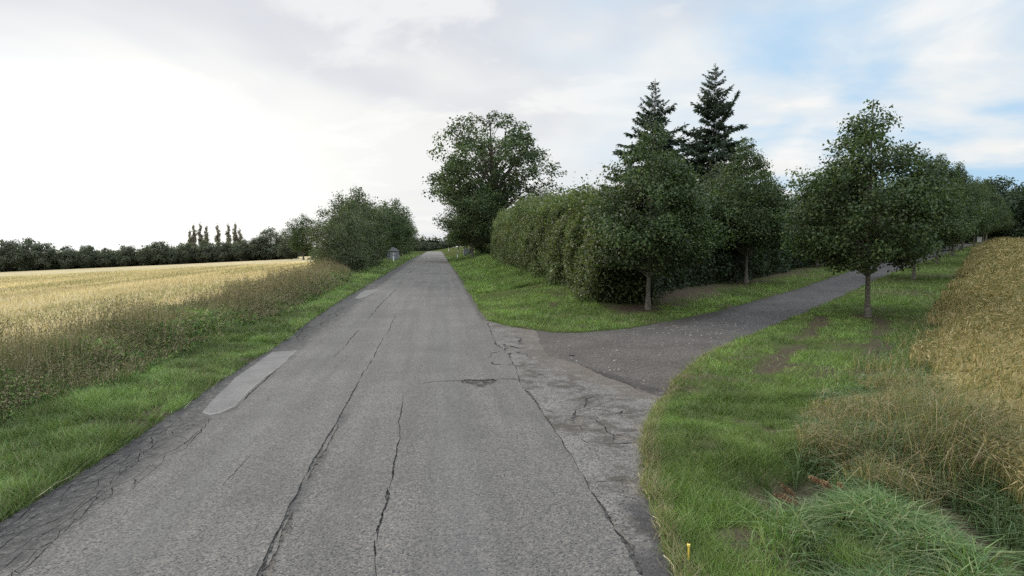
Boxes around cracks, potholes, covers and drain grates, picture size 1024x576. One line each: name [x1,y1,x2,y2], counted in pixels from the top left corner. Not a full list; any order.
crack [490,336,635,446]
crack [222,293,395,576]
crack [373,402,403,576]
pothole [461,379,497,387]
